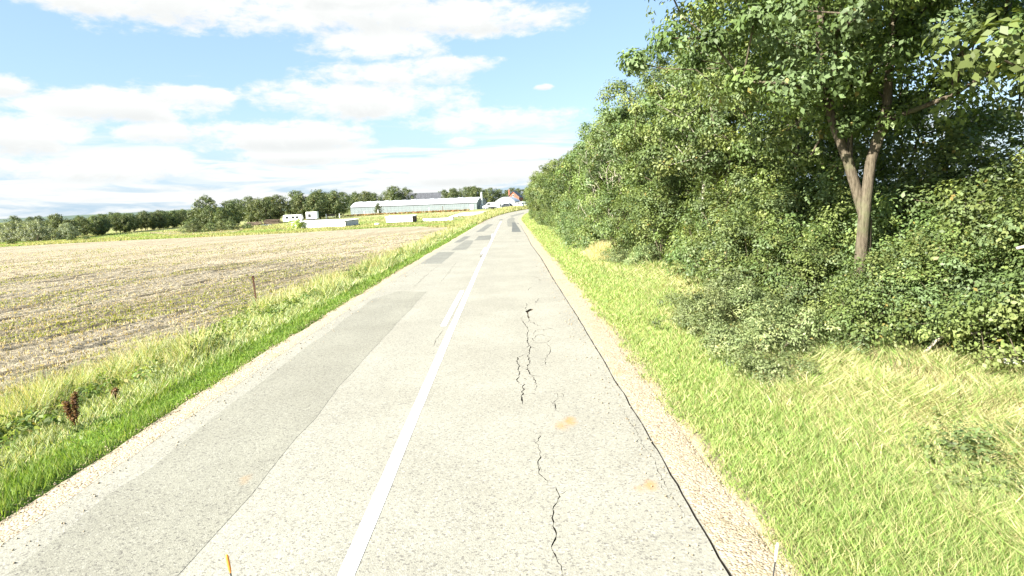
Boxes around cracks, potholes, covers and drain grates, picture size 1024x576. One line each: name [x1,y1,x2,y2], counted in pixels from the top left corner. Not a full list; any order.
crack [517,226,732,576]
